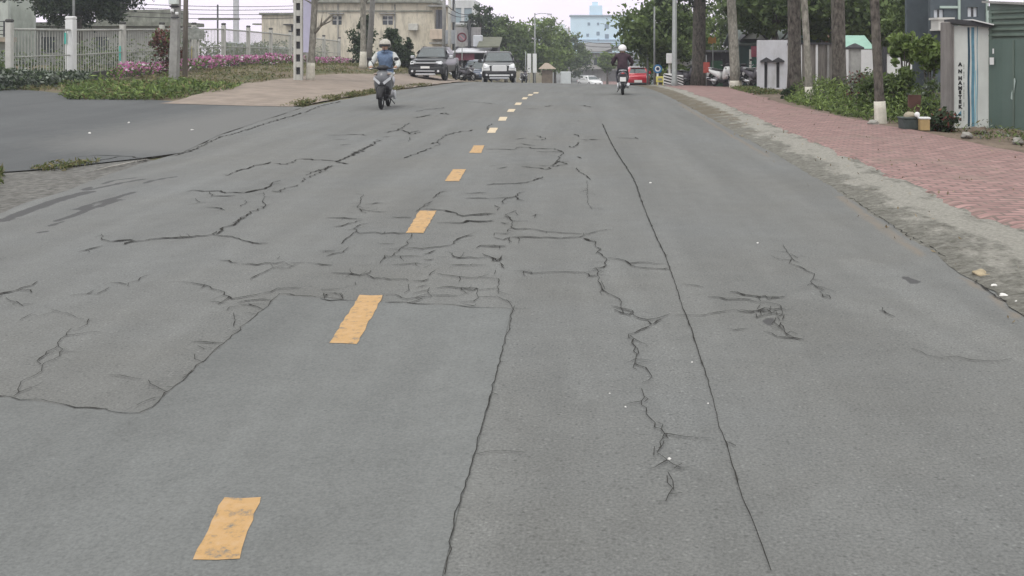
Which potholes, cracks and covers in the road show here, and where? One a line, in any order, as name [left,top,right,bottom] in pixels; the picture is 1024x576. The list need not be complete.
crack [770,245,836,298]
crack [513,228,714,500]
crack [78,115,427,252]
crack [324,105,597,306]
crack [14,276,143,396]
crack [0,281,37,320]
crack [178,260,342,362]
